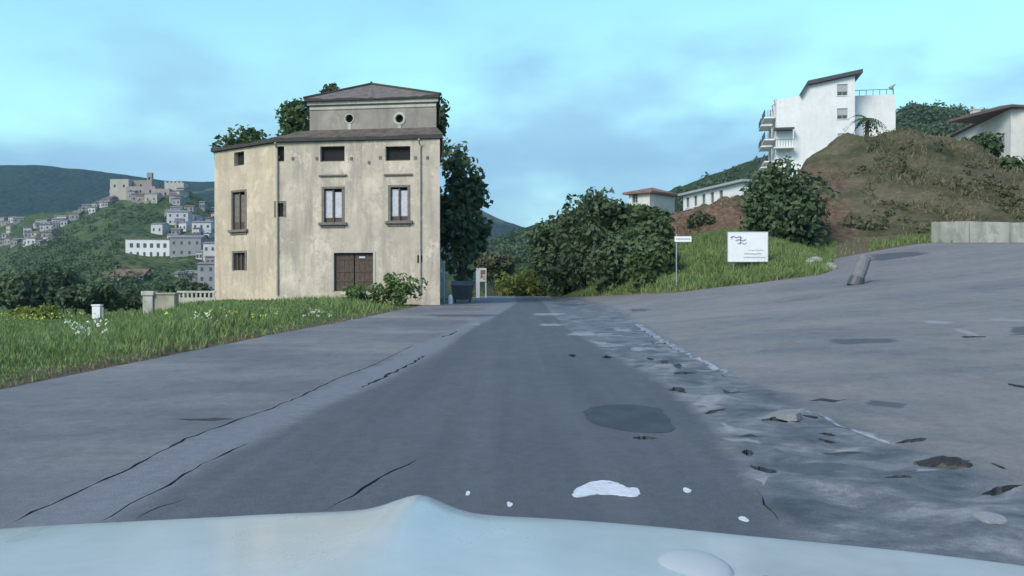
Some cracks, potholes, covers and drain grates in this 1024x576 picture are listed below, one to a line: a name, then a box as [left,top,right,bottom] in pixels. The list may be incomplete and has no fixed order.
crack [327,458,419,510]
crack [98,444,246,523]
pothole [981,485,1022,496]
pothole [915,455,974,470]
crack [362,356,424,387]
